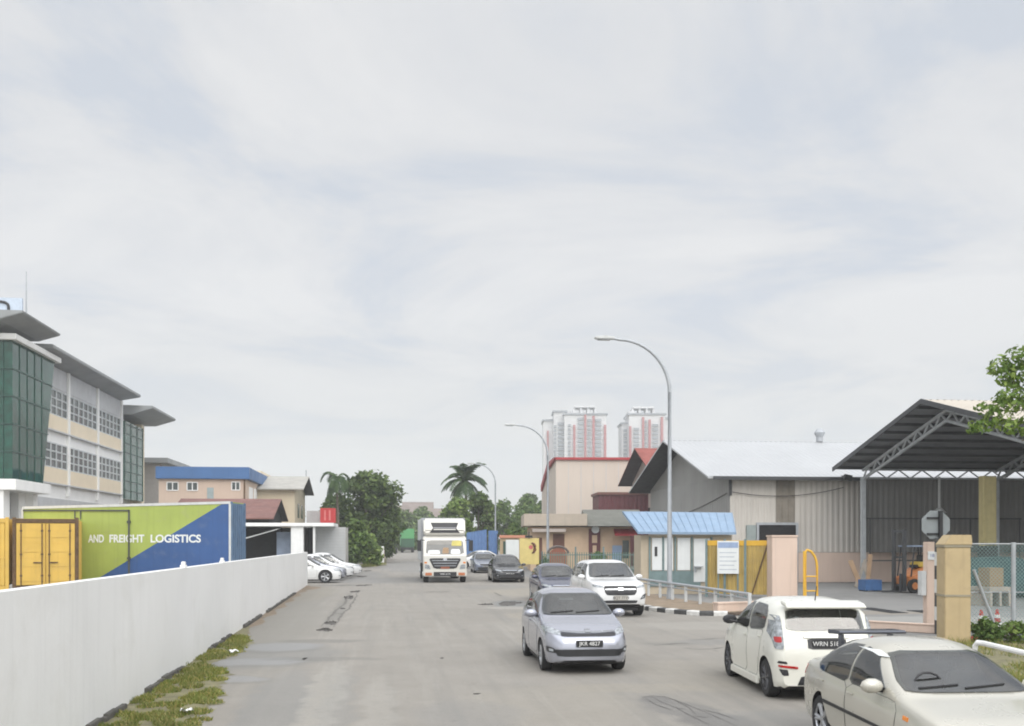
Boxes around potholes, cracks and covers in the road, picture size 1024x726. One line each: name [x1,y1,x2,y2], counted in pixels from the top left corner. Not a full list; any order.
crack [646,696,734,725]
